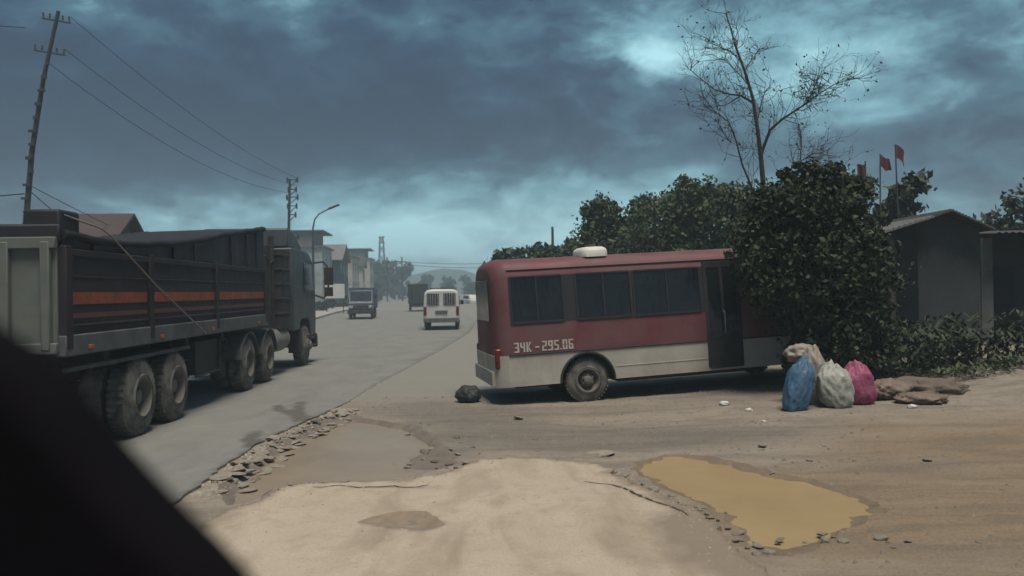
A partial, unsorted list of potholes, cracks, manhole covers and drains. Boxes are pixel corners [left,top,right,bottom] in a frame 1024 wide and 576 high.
pothole [217,412,458,505]
pothole [629,454,890,556]
crack [584,481,688,515]
